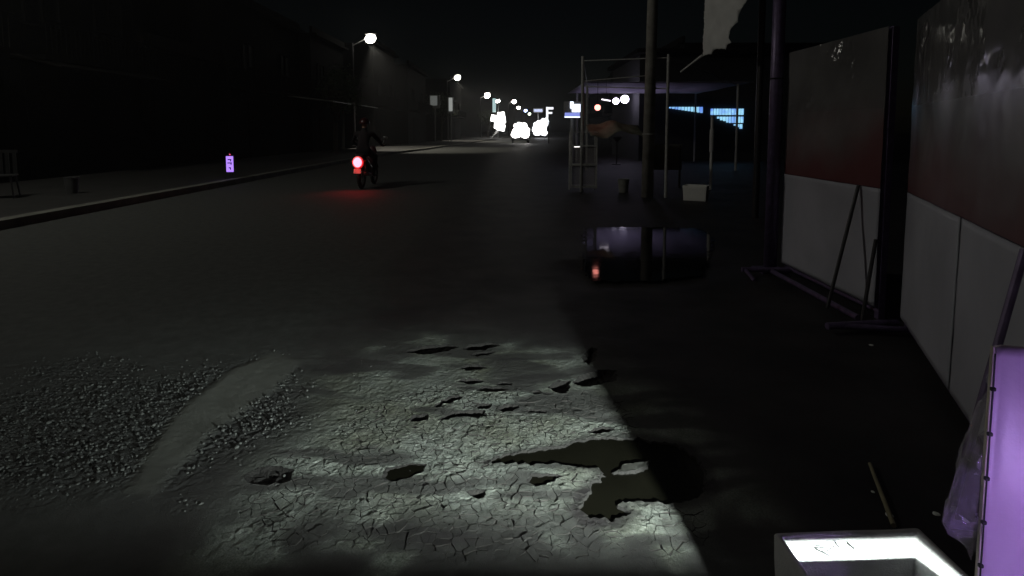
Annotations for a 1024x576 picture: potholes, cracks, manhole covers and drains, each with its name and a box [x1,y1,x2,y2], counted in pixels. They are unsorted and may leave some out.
pothole [437,409,487,421]
crack [638,505,720,556]
crack [240,453,333,548]
crack [314,386,640,564]
pothole [242,466,295,485]
pothole [480,436,708,523]
pothole [573,369,618,387]
pothole [548,380,571,394]
pothole [382,463,427,482]
pothole [405,344,459,355]
pothole [462,342,500,351]
